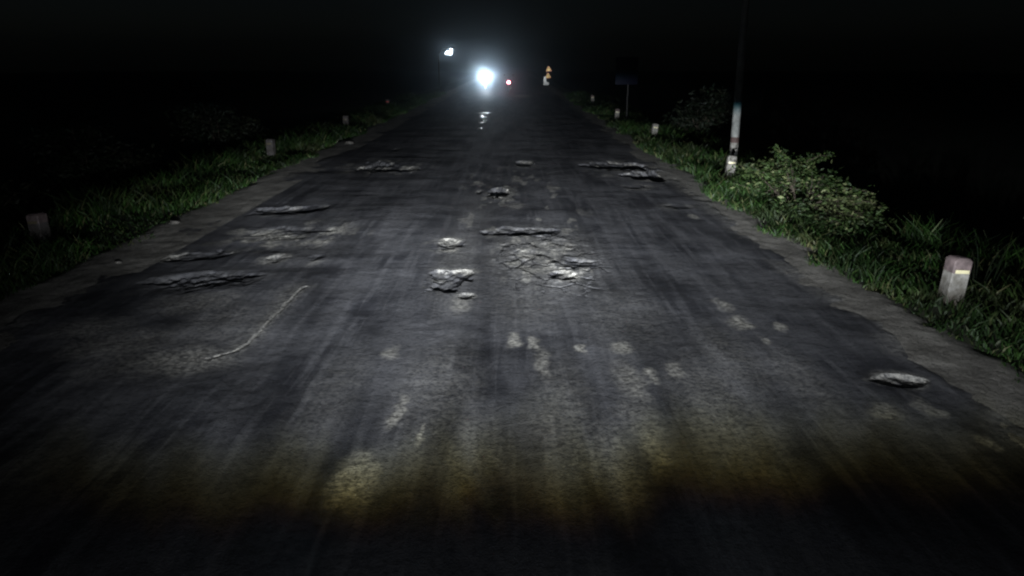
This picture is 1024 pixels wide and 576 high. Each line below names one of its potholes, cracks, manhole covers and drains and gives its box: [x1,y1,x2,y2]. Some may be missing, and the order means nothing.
pothole [867,373,933,389]
pothole [578,161,650,171]
pothole [484,187,511,200]
crack [492,226,618,297]
crack [202,286,309,360]
pothole [120,269,297,296]
pothole [618,170,676,183]
pothole [424,269,475,297]
pothole [157,249,236,263]
pothole [342,161,421,174]
pothole [437,238,469,250]
pothole [478,226,563,236]
